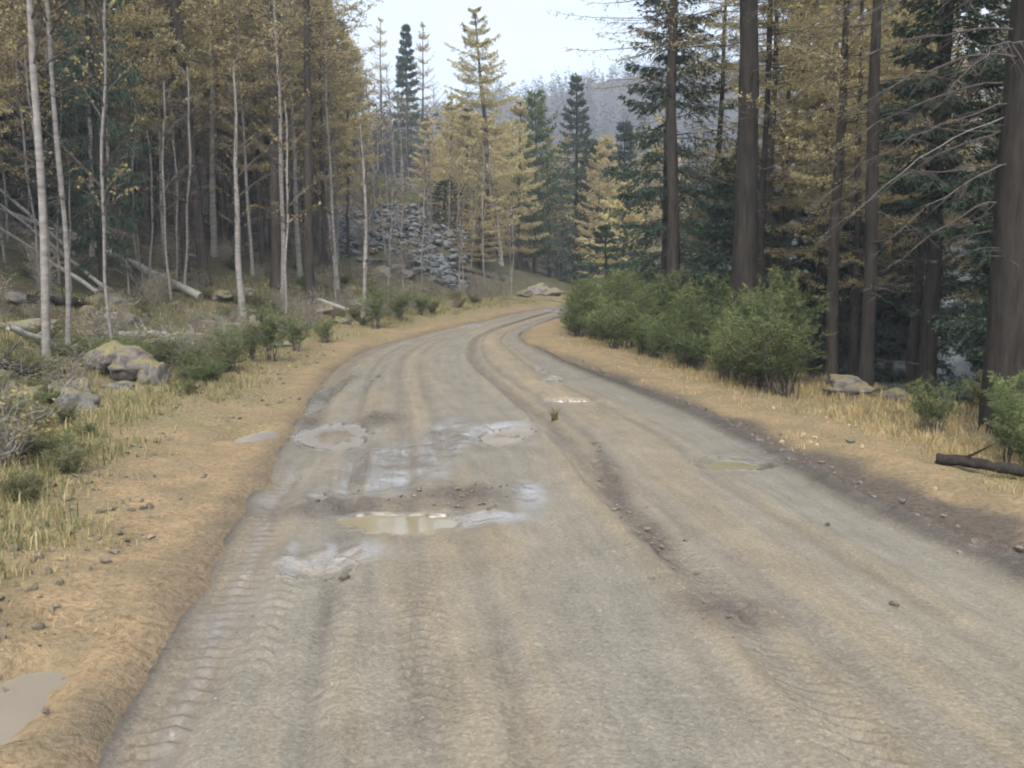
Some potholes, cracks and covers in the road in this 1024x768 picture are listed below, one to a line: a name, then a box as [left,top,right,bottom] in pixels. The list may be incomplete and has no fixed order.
pothole [686,454,784,472]
pothole [288,422,379,453]
pothole [274,556,362,583]
pothole [322,510,473,537]
pothole [539,376,564,384]
pothole [475,425,540,448]
